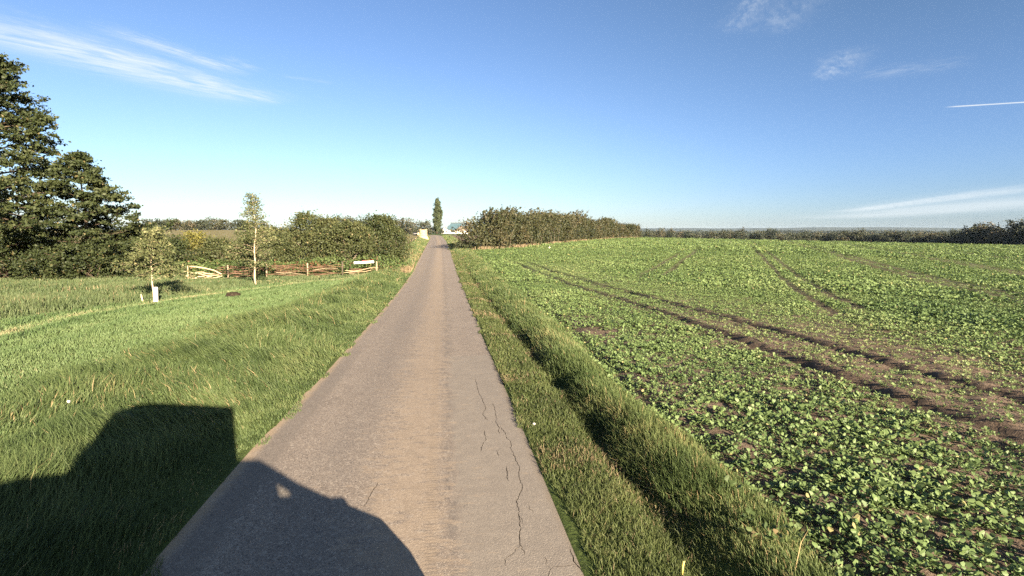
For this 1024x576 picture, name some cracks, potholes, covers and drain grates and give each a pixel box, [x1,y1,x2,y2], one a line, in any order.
crack [475,380,533,570]
